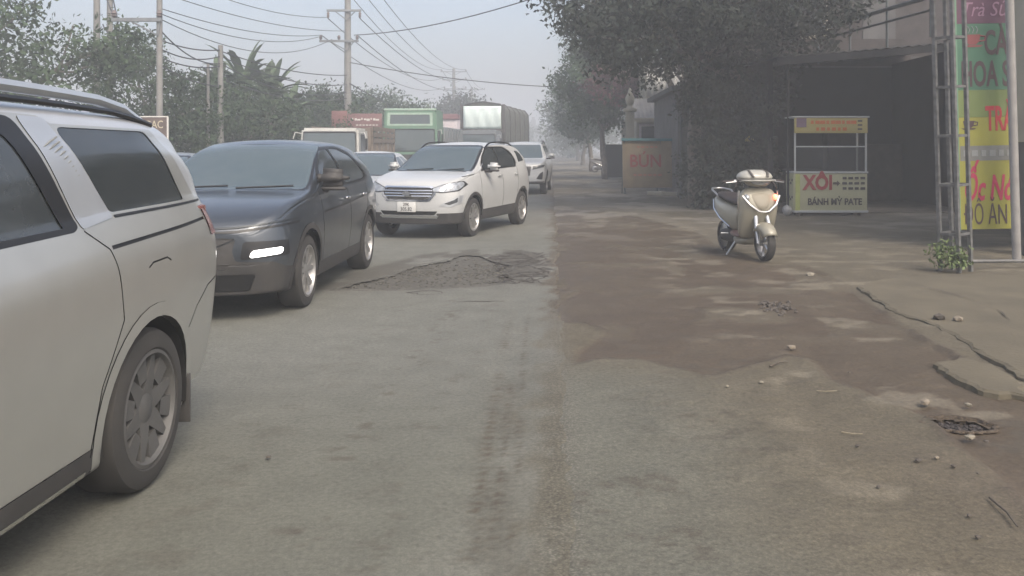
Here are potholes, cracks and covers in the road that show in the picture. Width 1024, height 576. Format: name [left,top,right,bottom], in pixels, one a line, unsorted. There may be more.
pothole [918,414,999,434]
pothole [329,254,517,291]
